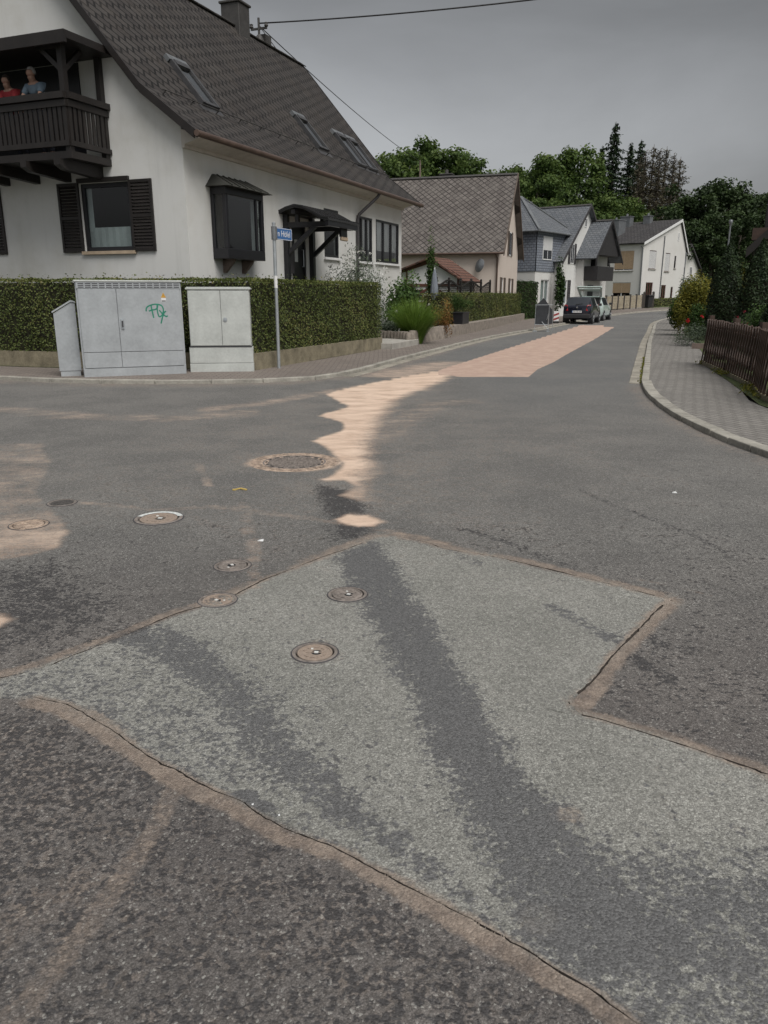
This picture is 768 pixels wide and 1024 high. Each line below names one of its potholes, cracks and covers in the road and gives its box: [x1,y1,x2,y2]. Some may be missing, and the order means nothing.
manhole cover [249,453,339,472]
manhole cover [132,511,185,526]
manhole cover [46,499,78,507]
manhole cover [7,519,50,530]
manhole cover [213,559,252,572]
manhole cover [290,642,339,664]
manhole cover [197,592,238,608]
manhole cover [327,586,368,602]
